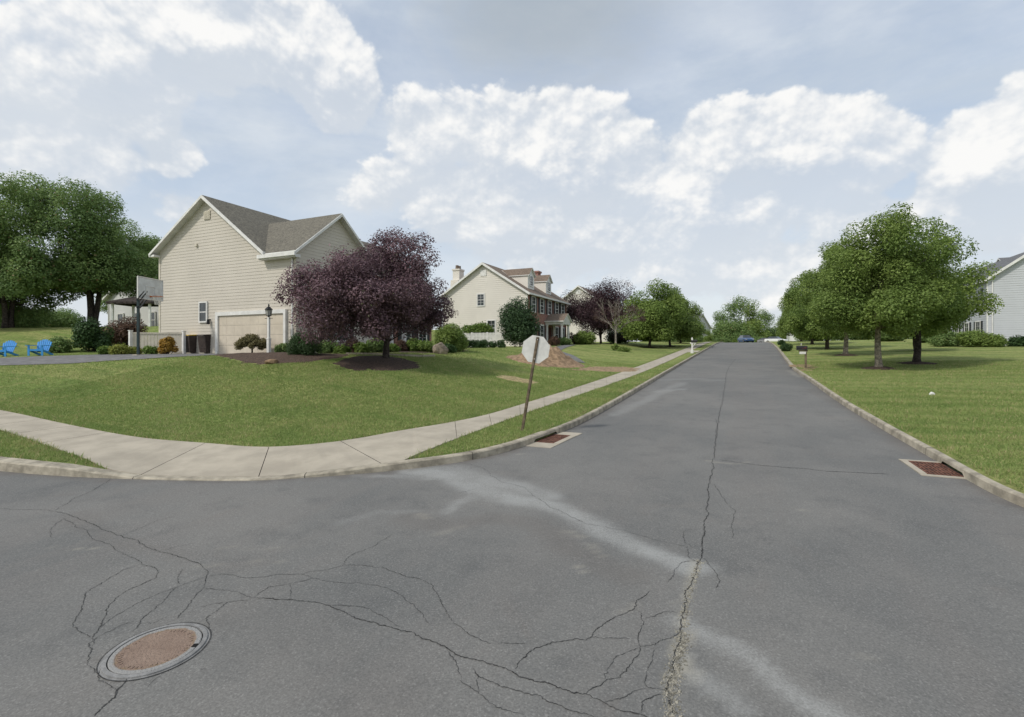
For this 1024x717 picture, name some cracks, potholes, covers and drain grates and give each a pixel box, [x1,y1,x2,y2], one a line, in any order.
crack [538,498,720,588]
manhole cover [96,622,211,681]
drain grate [525,432,582,448]
drain grate [899,459,966,479]
crack [4,479,678,717]
